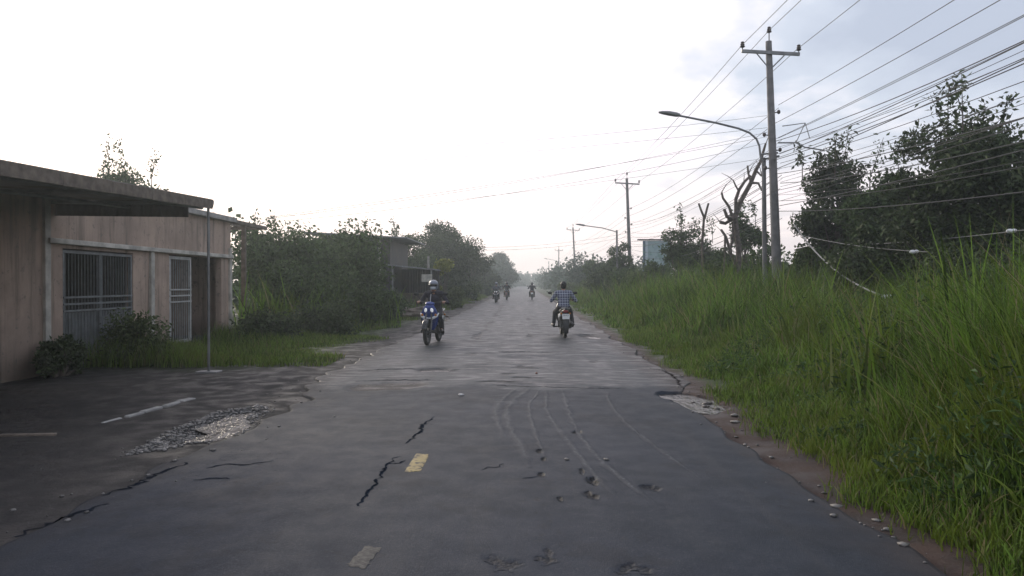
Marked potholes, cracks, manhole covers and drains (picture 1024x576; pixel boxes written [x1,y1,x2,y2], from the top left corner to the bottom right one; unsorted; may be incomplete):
pothole [483,553,525,572]
pothole [148,408,270,450]
pothole [533,547,560,566]
crack [14,461,269,537]
pothole [613,560,660,574]
crack [356,417,433,506]
